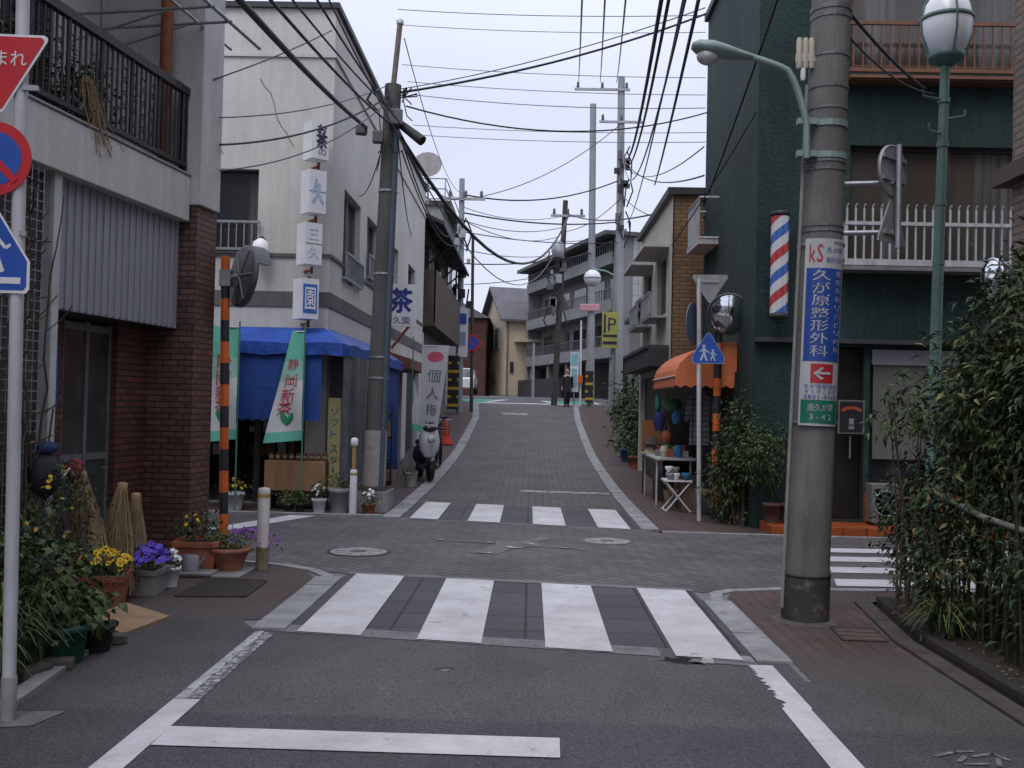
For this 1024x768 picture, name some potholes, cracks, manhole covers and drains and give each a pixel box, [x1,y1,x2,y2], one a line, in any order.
pothole [656,656,712,665]
manhole cover [327,547,391,557]
manhole cover [581,537,632,545]
